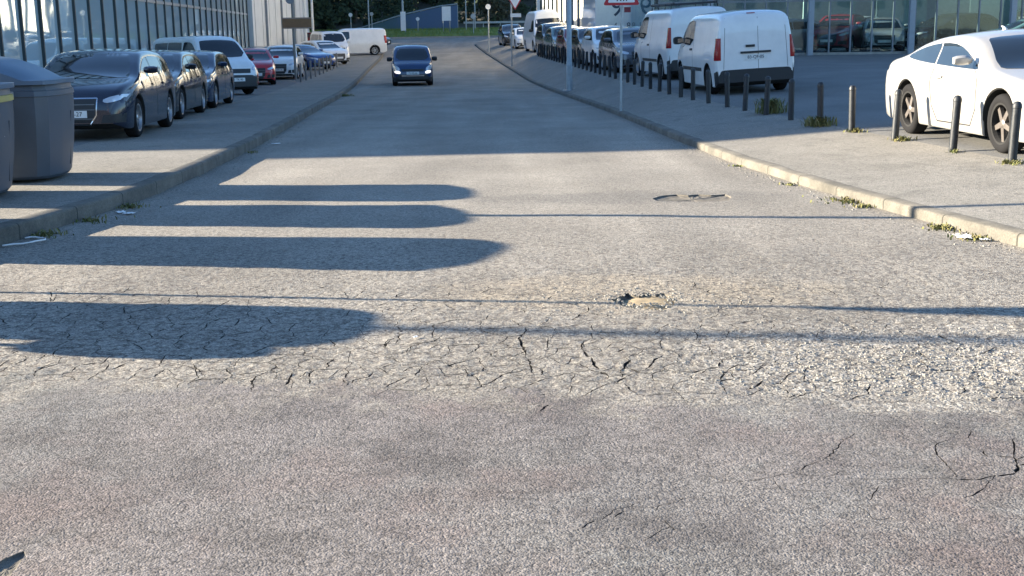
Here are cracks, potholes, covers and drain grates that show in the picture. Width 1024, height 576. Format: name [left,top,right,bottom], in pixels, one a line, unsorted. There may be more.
crack [854,430,1024,521]
crack [0,283,607,411]
crack [571,279,1024,402]
pothole [611,292,676,310]
crack [582,504,634,528]
